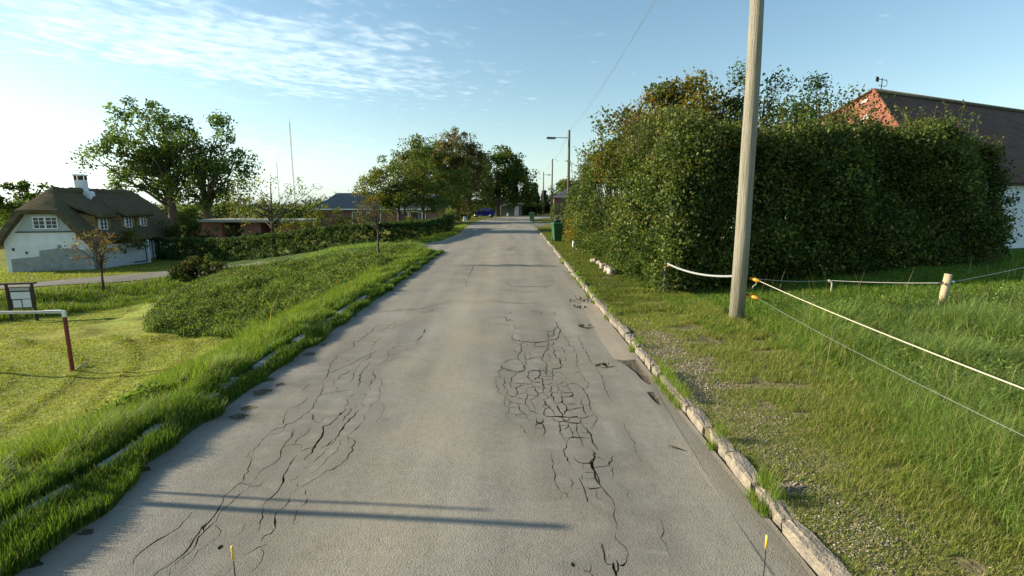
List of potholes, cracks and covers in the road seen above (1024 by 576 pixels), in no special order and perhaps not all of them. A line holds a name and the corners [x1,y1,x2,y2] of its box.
pothole [616,360,653,385]
crack [133,324,425,576]
crack [496,312,629,576]
